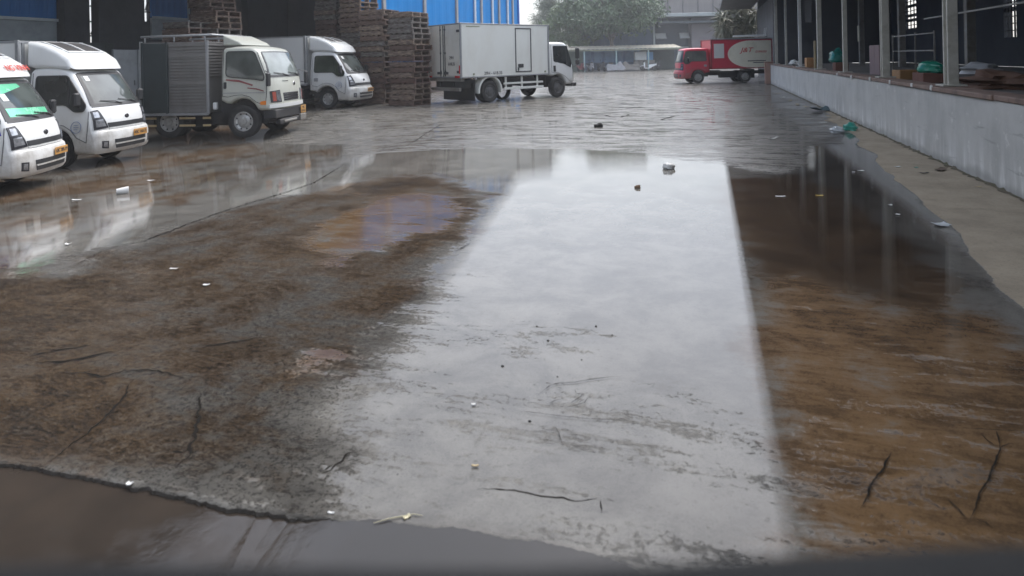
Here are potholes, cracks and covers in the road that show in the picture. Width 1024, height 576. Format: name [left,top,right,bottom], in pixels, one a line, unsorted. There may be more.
crack [27,344,202,464]
crack [324,449,356,473]
crack [480,488,602,514]
crack [860,453,891,508]
crack [946,428,1020,528]
crack [526,376,623,445]
crack [194,336,261,349]
